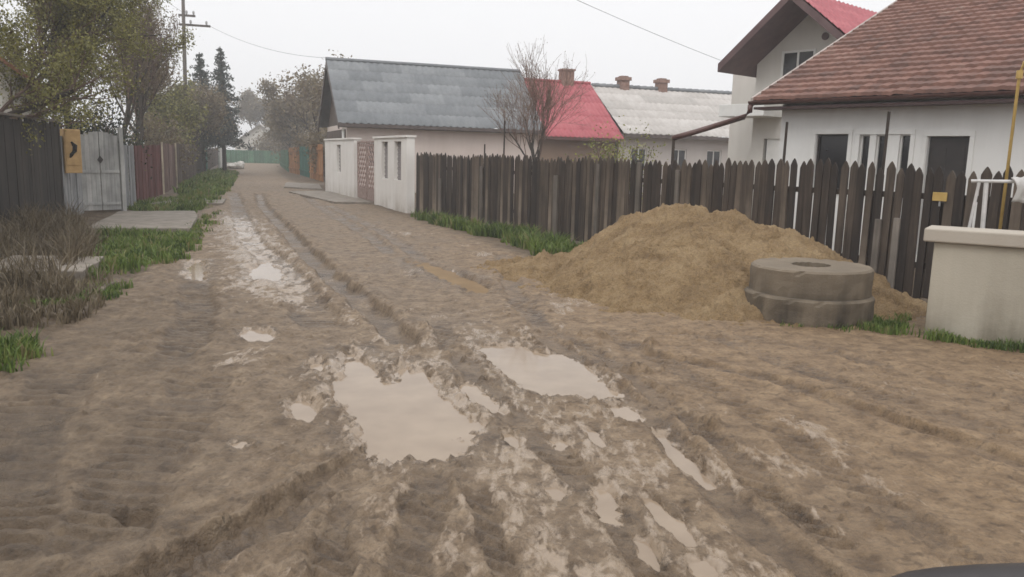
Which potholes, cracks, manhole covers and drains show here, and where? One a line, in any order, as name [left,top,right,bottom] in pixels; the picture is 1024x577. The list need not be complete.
pothole [293,341,514,482]
pothole [456,336,650,410]
